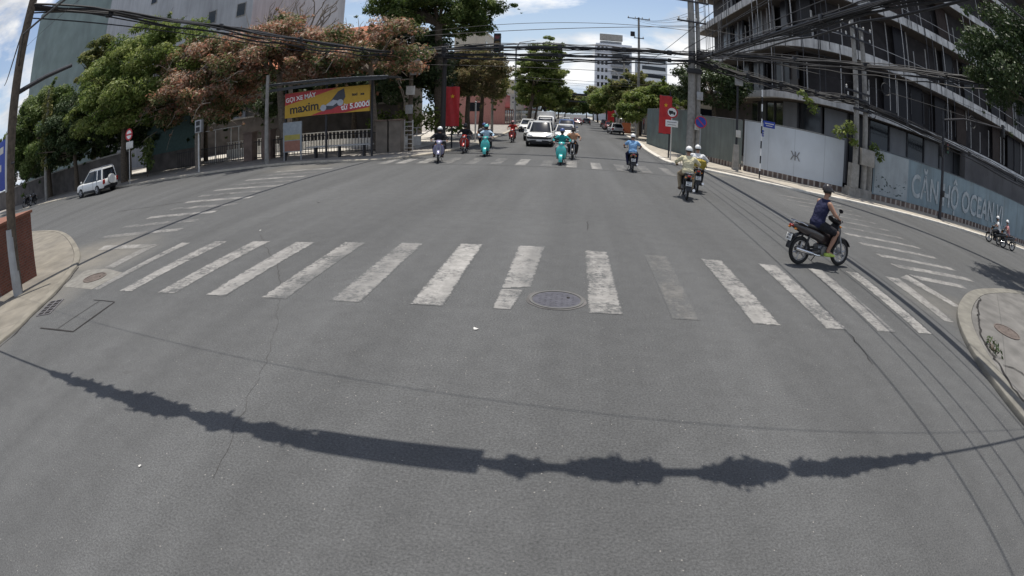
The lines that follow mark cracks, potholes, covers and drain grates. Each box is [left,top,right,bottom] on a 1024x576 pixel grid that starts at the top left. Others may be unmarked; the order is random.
manhole cover [526,290,587,311]
drain grate [36,299,64,317]
crack [214,301,280,475]
manhole cover [994,323,1020,340]
